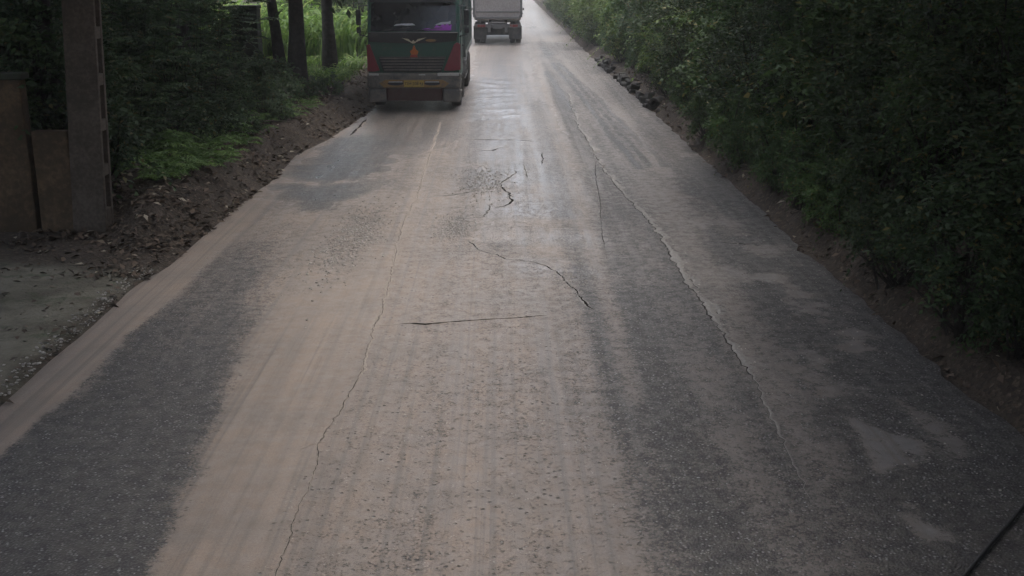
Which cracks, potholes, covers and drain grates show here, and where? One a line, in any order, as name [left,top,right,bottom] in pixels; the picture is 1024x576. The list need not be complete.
crack [567,93,811,503]
crack [403,315,545,325]
crack [431,139,595,310]
